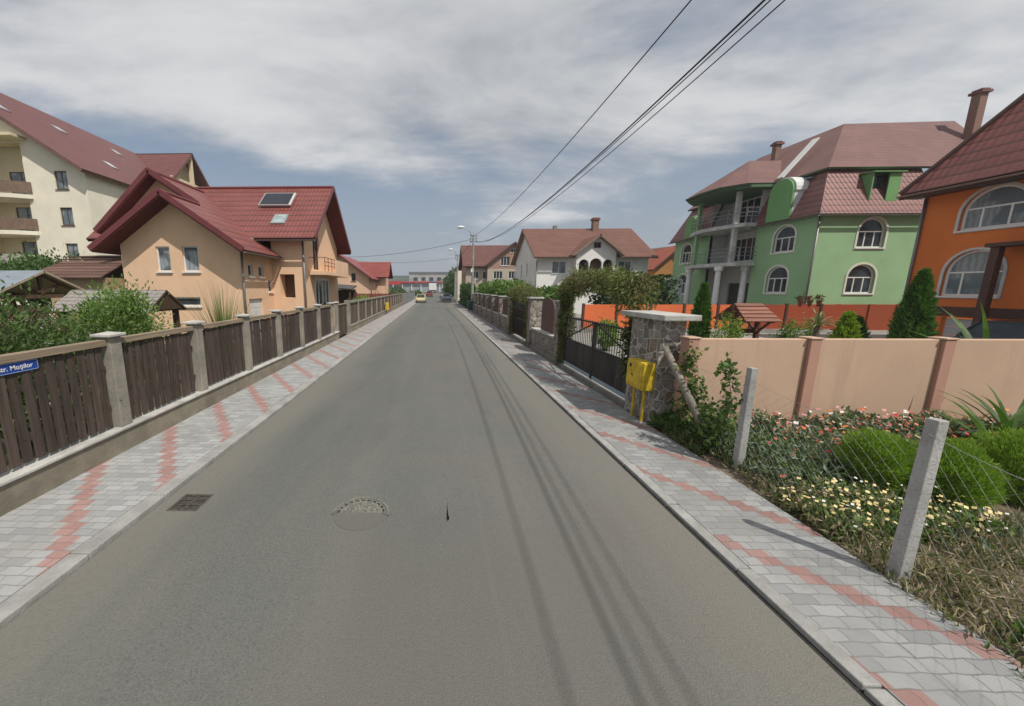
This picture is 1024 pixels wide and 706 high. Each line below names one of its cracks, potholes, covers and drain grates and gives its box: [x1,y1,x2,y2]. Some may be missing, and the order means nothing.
drain grate [166,494,214,511]
manhole cover [331,497,390,531]
